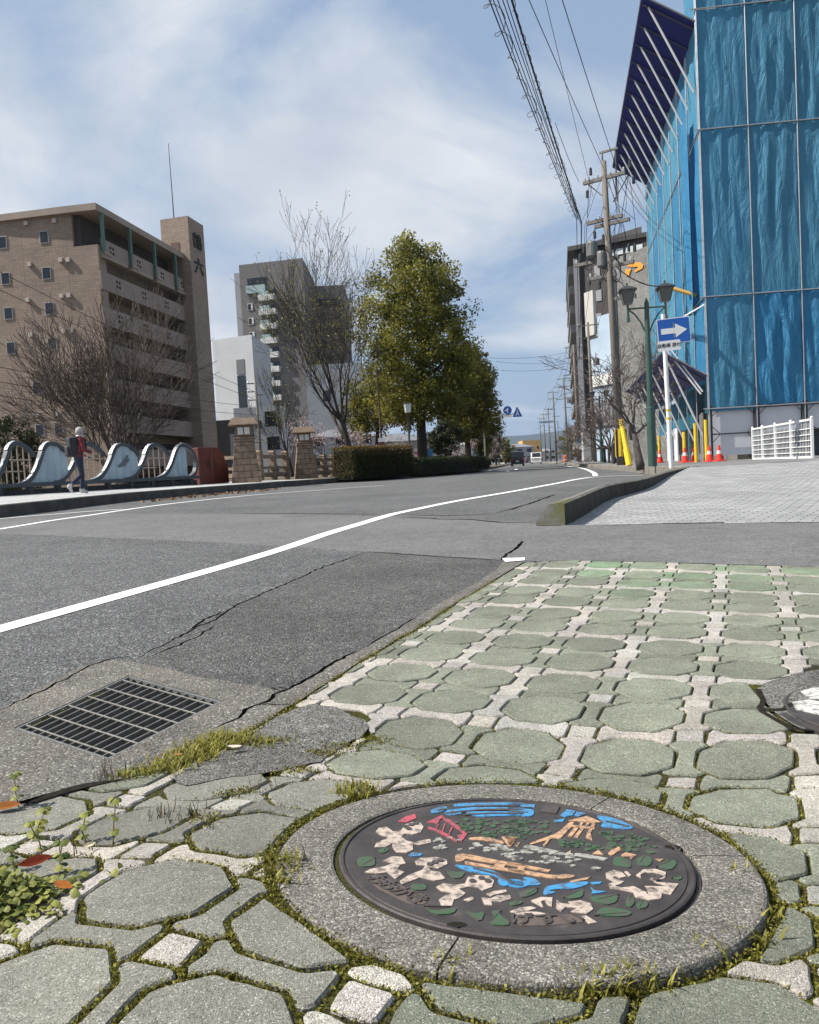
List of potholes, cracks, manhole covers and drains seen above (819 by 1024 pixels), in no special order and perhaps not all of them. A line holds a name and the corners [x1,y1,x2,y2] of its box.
manhole cover [777,687,819,735]
drain grate [15,675,222,804]
crack [1,494,561,728]
manhole cover [275,784,769,996]
